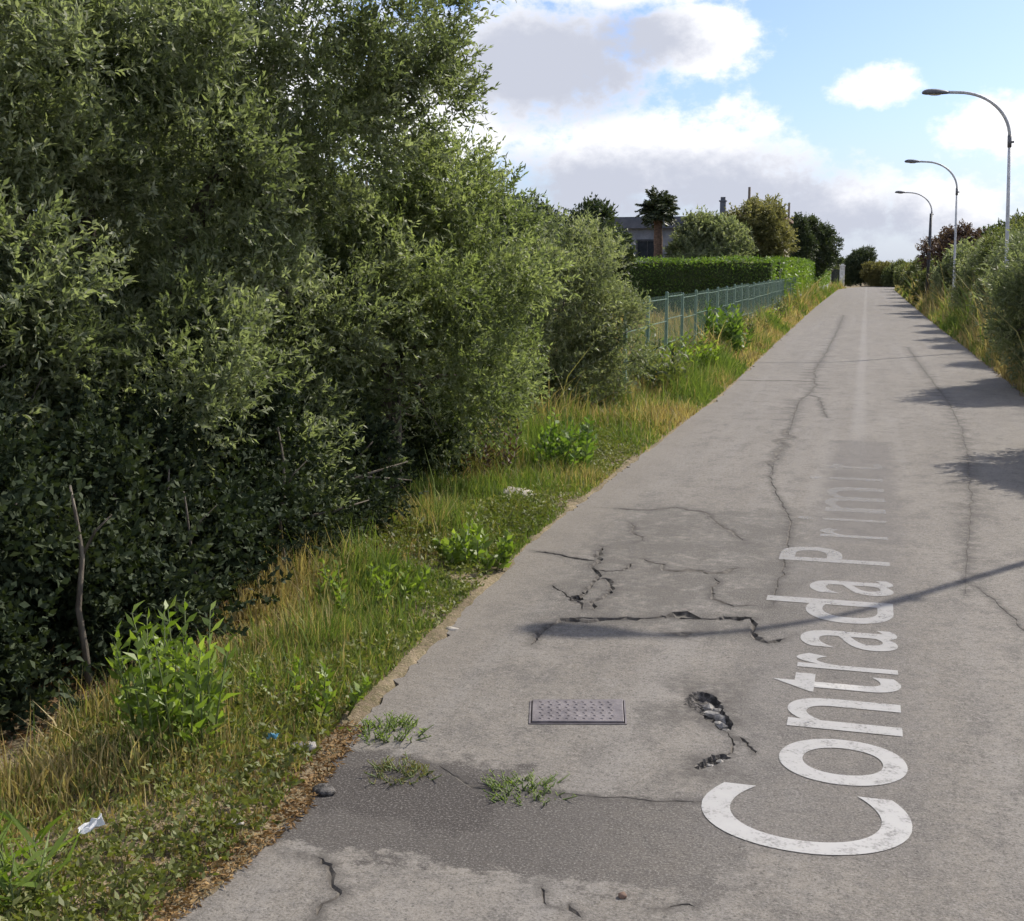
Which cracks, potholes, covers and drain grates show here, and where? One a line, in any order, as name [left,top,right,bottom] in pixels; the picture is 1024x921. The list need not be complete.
crack [531,318,843,645]
crack [316,857,342,916]
pothole [683,691,733,731]
crack [566,904,582,918]
pothole [694,754,731,770]
crack [908,348,1024,631]
